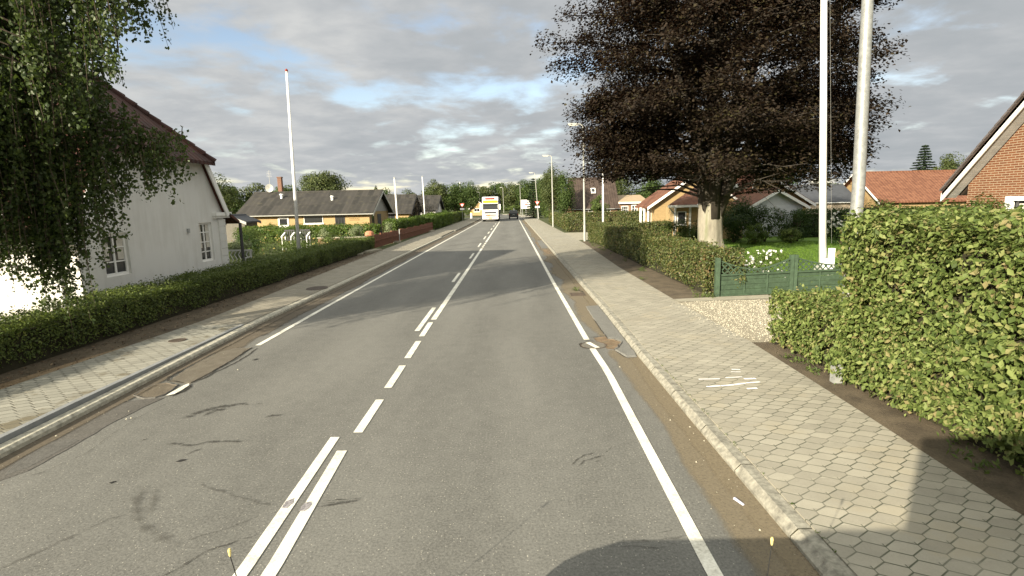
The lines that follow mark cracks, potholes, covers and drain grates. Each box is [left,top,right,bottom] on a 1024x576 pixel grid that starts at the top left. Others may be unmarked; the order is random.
crack [186,403,281,417]
